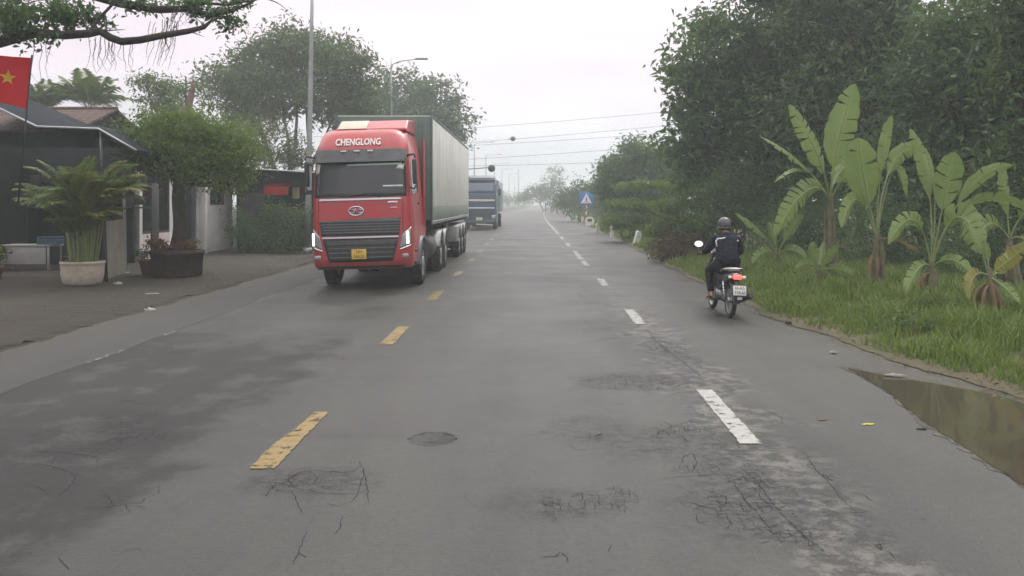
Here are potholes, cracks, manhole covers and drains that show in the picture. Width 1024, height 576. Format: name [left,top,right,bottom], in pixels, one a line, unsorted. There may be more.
crack [759,407,871,512]
crack [59,486,160,570]
crack [578,404,835,551]
crack [540,486,639,517]
crack [254,464,369,510]
